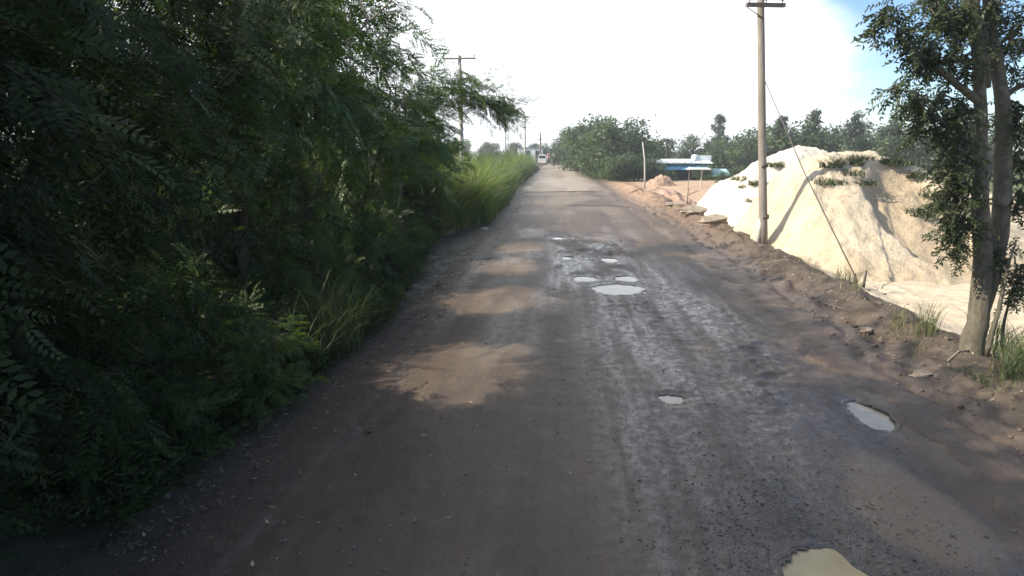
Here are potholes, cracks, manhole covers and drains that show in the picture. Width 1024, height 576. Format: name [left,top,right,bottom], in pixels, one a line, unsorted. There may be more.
pothole [586,283,650,296]
pothole [770,539,873,576]
pothole [841,398,902,434]
pothole [655,393,687,405]
